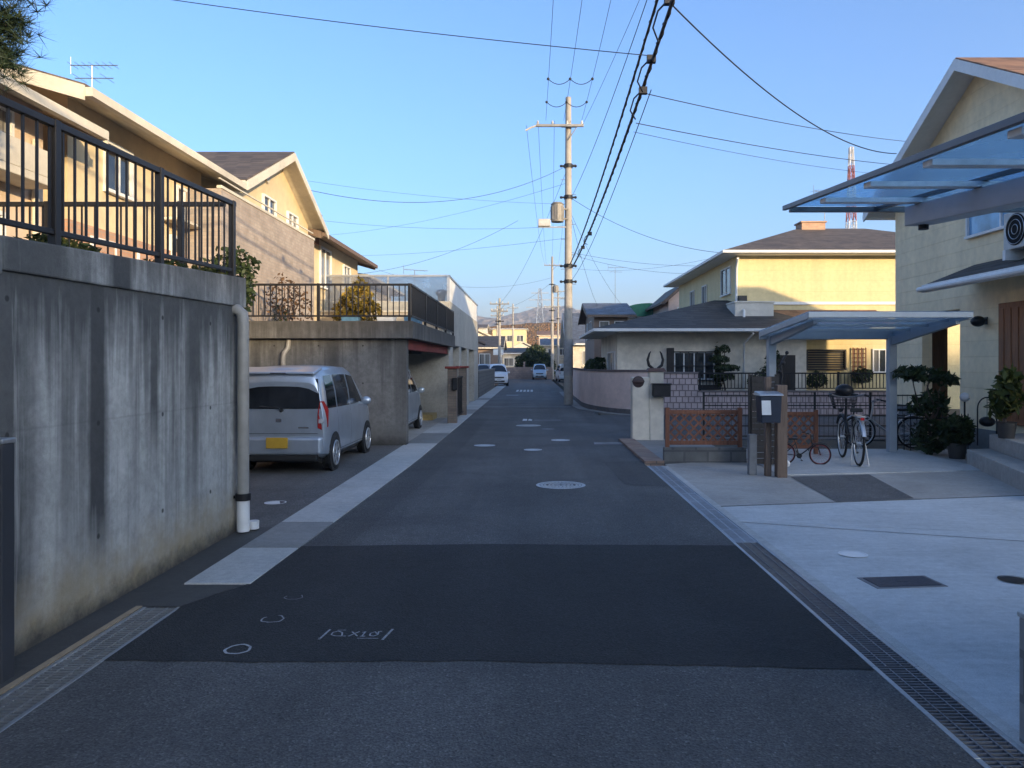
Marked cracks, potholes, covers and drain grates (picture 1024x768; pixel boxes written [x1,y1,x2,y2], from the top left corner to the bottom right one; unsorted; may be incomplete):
drain grate [872,667,1024,761]
drain grate [975,759,1024,768]
drain grate [733,542,796,571]
drain grate [54,607,179,664]
drain grate [765,571,846,611]
manhole cover [536,481,586,489]
drain grate [0,663,100,733]
drain grate [809,610,919,668]
